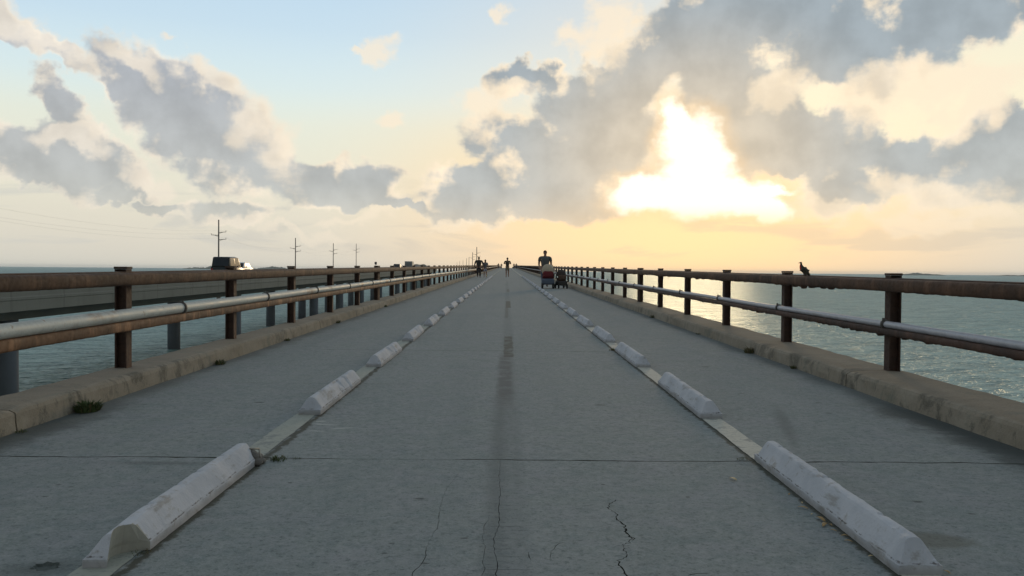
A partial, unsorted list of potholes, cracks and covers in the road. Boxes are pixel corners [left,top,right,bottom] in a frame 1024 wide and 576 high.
crack [607,500,635,576]
